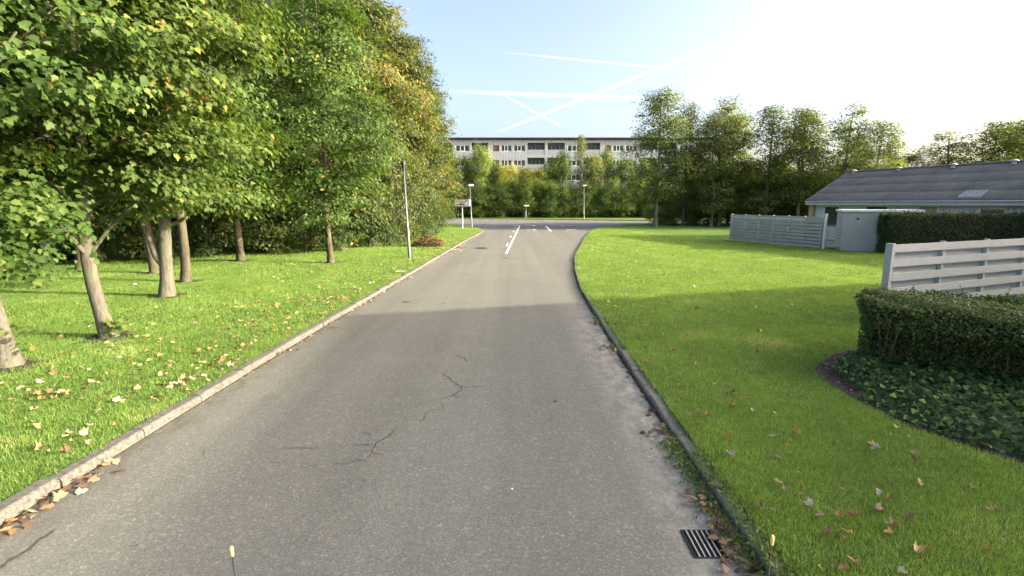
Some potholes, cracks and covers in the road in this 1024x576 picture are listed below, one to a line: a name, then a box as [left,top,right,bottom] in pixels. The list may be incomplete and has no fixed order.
crack [419,356,479,424]
crack [337,428,396,487]
drain grate [680,529,728,559]
crack [0,529,56,569]
